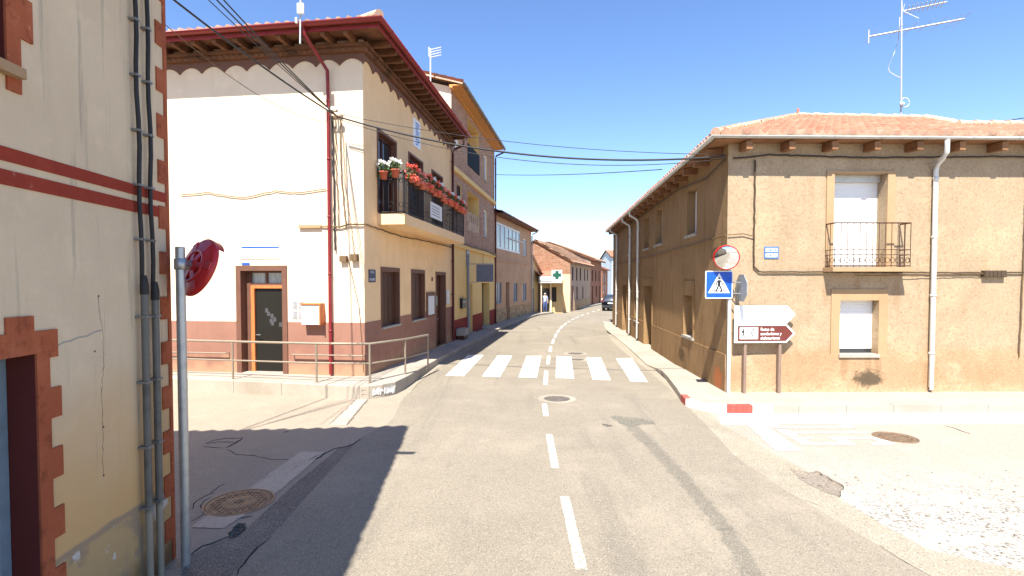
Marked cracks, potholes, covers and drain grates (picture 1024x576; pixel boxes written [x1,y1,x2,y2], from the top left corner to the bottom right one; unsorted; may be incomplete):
crack [204,438,360,482]
manhole cover [201,489,275,517]
crack [191,484,272,574]
manhole cover [538,394,576,403]
pothole [790,469,844,497]
manhole cover [872,431,920,444]
